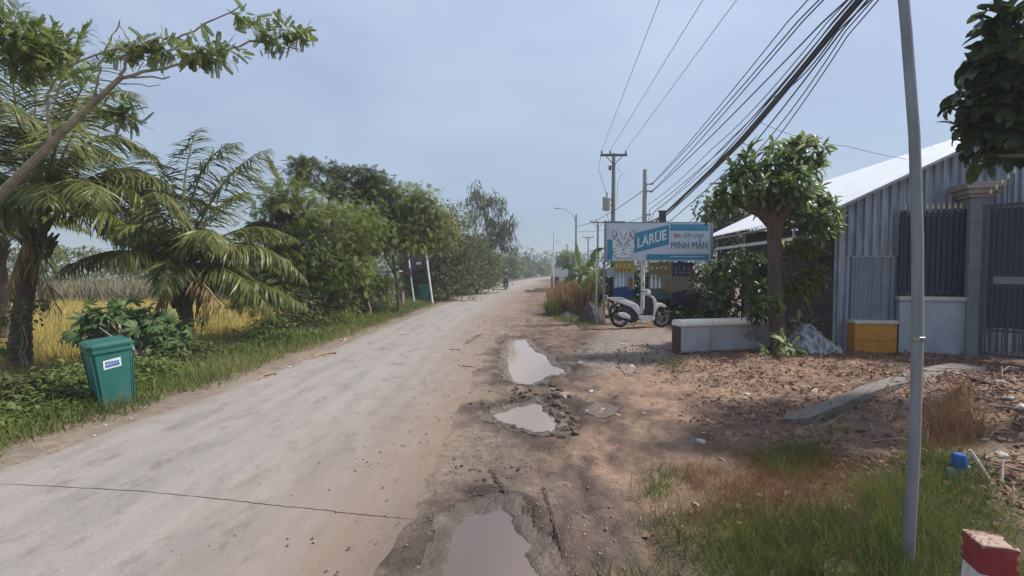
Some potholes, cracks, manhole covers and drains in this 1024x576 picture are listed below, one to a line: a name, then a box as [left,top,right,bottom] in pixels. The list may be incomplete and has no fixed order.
pothole [498,338,573,385]
pothole [476,396,572,437]
pothole [406,491,571,576]
crack [490,469,516,518]
crack [545,490,565,558]
